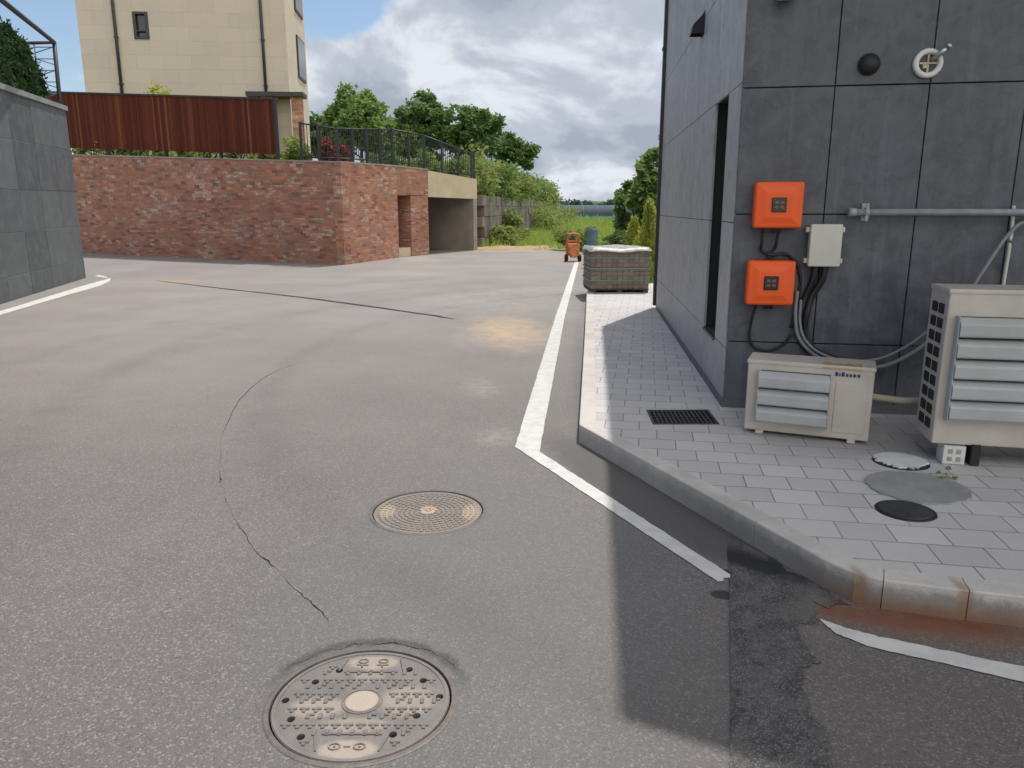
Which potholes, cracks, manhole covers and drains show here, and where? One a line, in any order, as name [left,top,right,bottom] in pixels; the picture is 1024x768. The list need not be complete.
drain grate [646,410,719,425]
manhole cover [872,452,930,471]
manhole cover [369,490,487,535]
crack [219,365,328,620]
manhole cover [875,500,937,522]
manhole cover [262,647,458,768]
